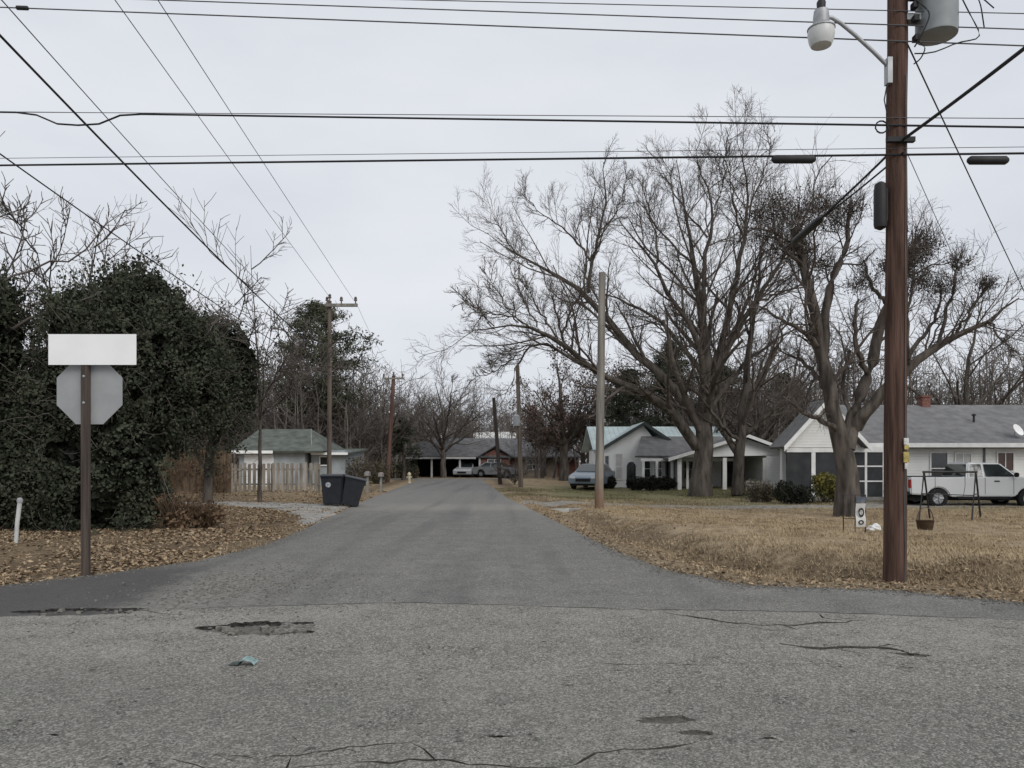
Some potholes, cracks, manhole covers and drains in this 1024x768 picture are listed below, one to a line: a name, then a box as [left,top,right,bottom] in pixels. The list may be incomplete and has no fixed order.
crack [155,602,1024,656]
pothole [11,608,147,616]
pothole [192,621,315,636]
crack [173,730,731,768]
